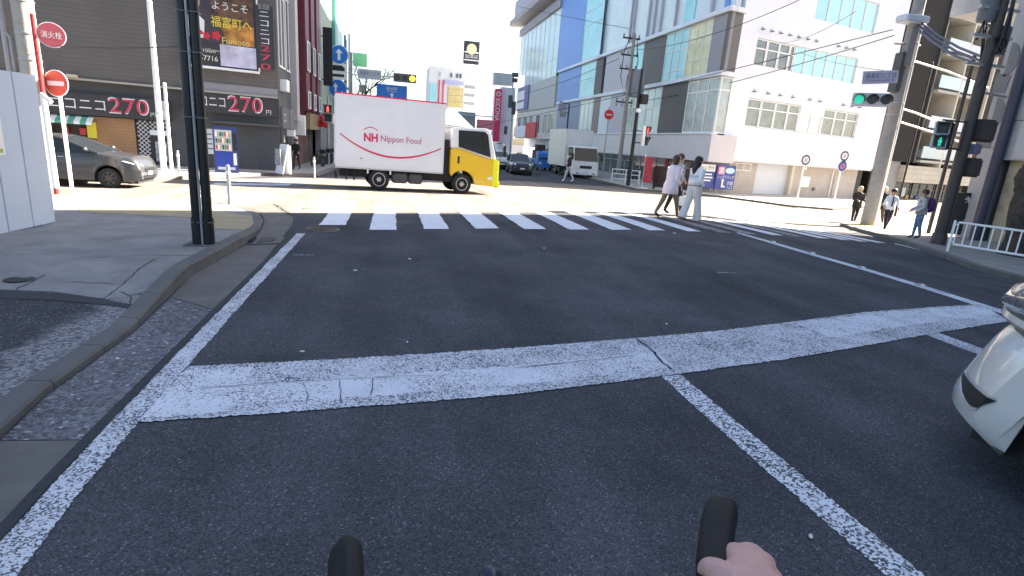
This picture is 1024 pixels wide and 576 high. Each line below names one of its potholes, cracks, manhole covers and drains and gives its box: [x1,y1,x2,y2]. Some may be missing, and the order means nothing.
crack [70,255,191,304]
drain grate [248,237,285,245]
